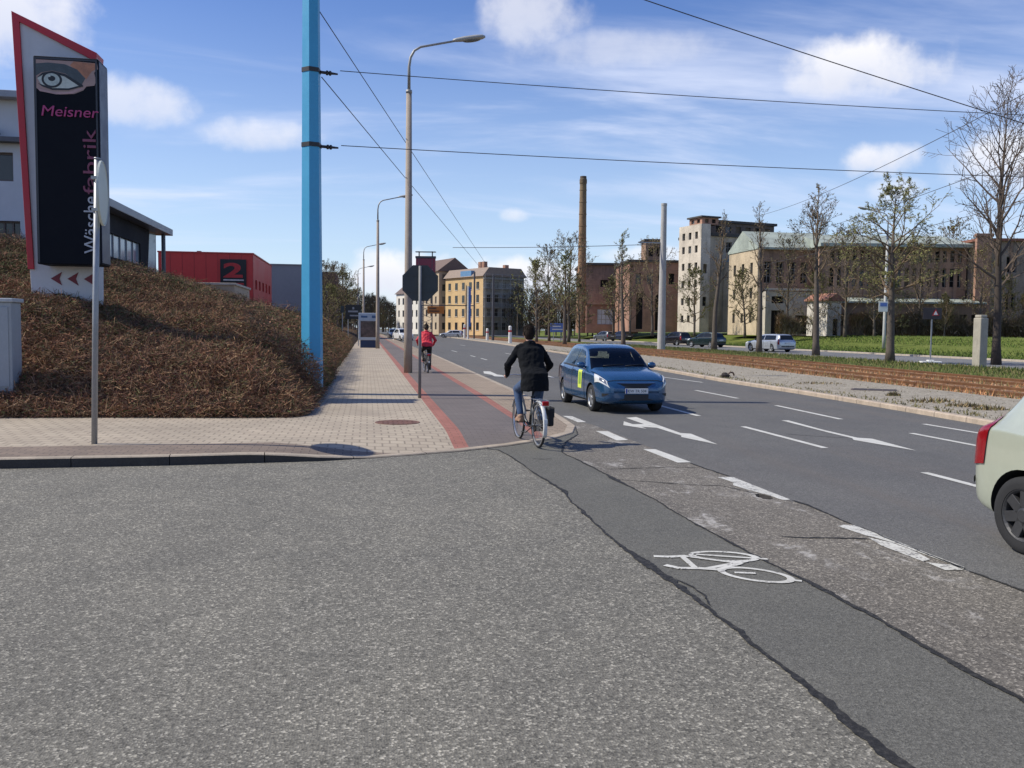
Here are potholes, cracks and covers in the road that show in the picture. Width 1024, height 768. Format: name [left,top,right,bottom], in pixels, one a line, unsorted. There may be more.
crack [406,427,1024,768]
